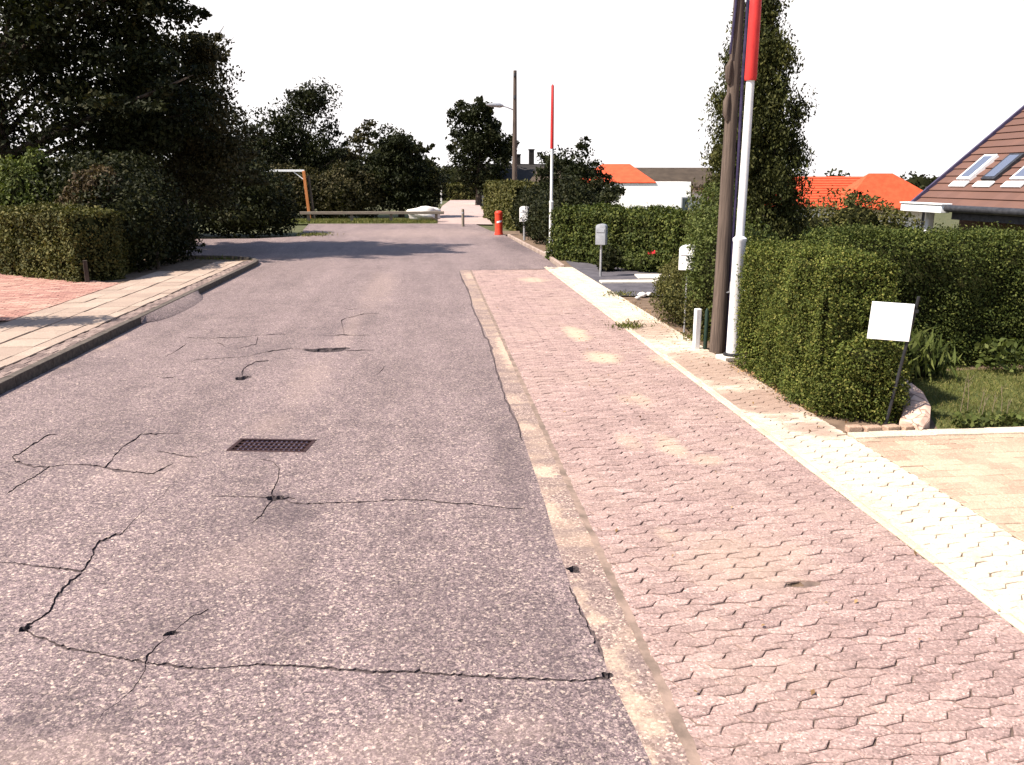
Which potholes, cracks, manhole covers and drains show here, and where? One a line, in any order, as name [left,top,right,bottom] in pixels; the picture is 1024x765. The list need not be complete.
crack [167,309,379,376]
crack [0,433,604,722]
